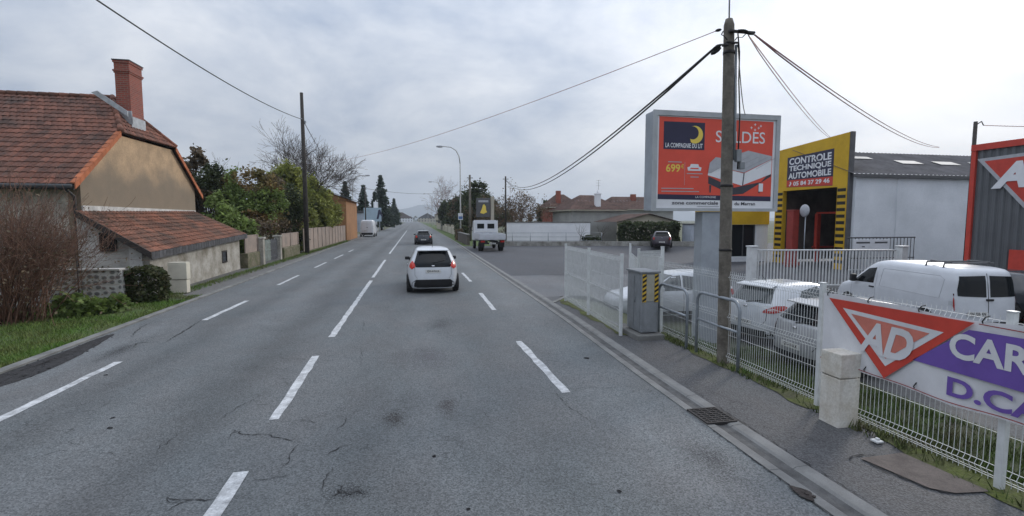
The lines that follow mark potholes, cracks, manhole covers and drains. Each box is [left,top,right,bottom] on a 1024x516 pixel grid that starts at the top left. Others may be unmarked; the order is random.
crack [224,394,316,480]
drain grate [687,407,737,425]
crack [166,497,209,512]
crack [320,446,365,495]
